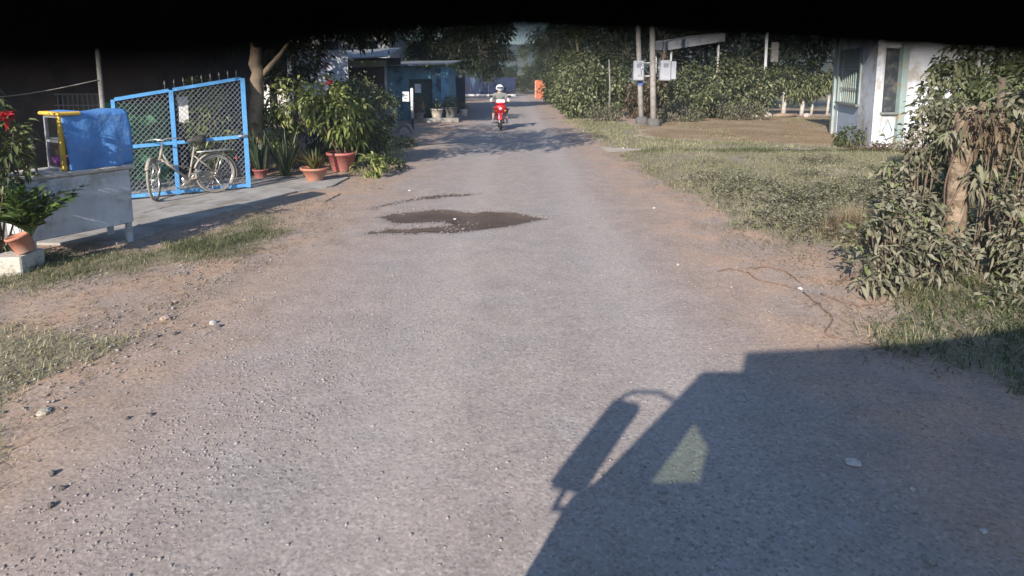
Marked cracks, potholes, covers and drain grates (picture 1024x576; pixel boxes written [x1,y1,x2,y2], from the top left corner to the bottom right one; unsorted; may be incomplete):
pothole [371,193,481,210]
pothole [363,209,548,235]
